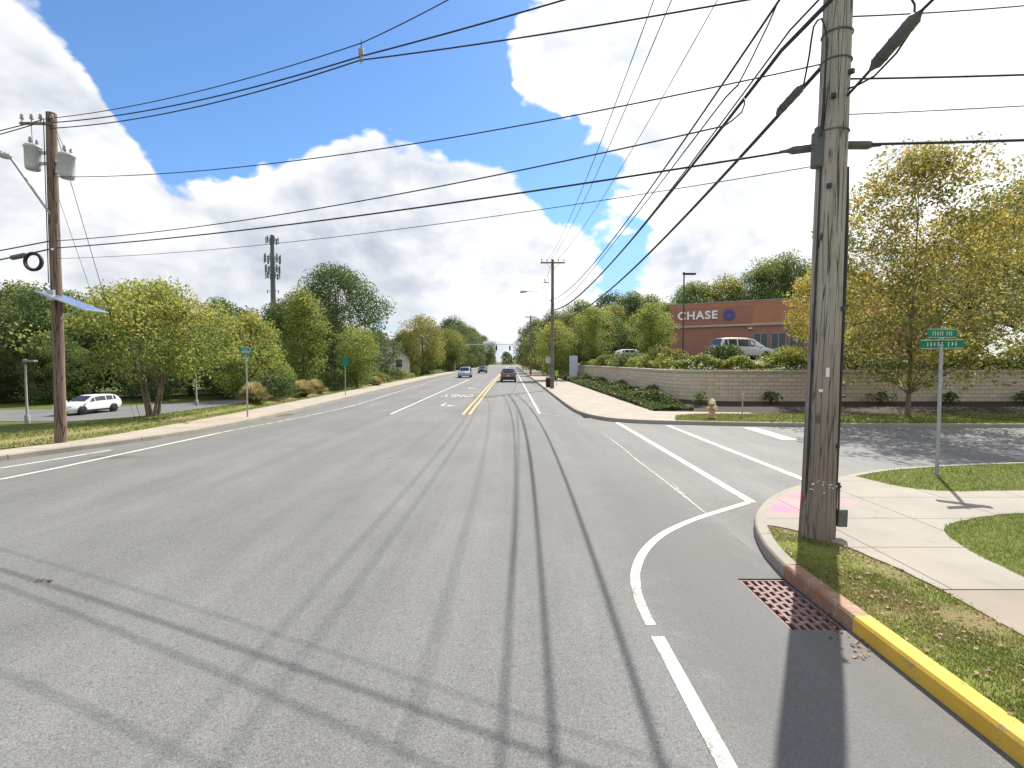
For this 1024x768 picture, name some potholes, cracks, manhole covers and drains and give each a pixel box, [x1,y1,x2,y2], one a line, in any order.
drain grate [738,579,848,631]
